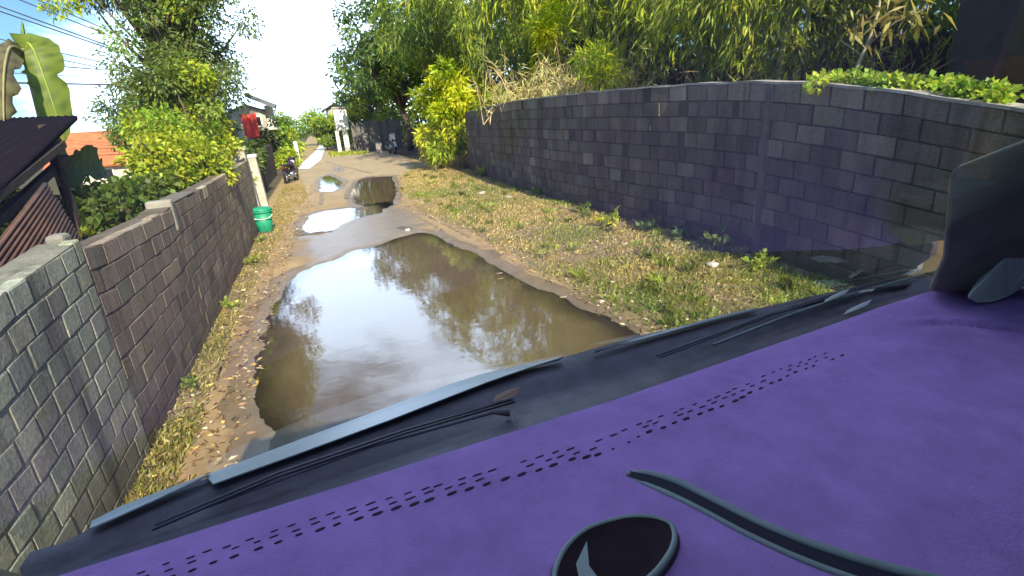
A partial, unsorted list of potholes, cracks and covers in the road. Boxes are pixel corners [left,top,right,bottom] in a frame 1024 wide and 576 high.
pothole [290,205,392,236]
pothole [314,173,349,193]
pothole [217,229,655,467]
pothole [344,175,404,209]
